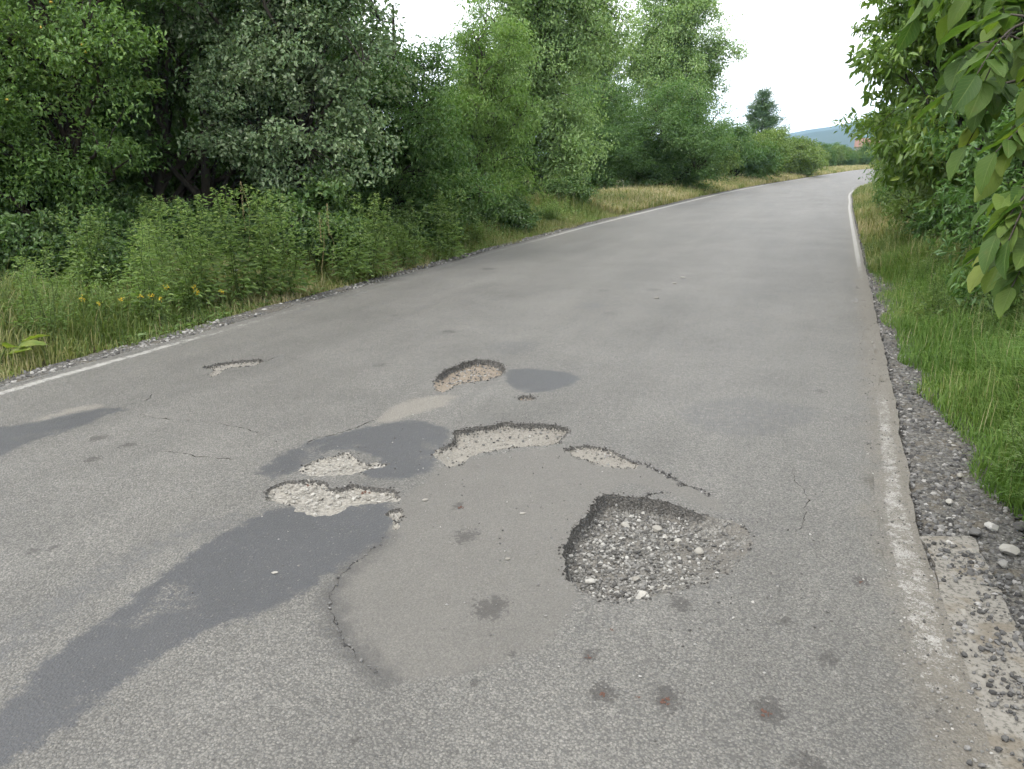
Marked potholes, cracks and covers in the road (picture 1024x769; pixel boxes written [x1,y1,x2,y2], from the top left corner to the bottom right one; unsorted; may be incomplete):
pothole [558,492,755,603]
pothole [430,421,571,468]
pothole [432,358,507,392]
pothole [298,451,390,477]
pothole [563,444,642,469]
crack [629,459,710,497]
pothole [201,358,264,377]
pothole [263,479,401,517]
pothole [384,508,407,531]
crack [328,537,383,676]
